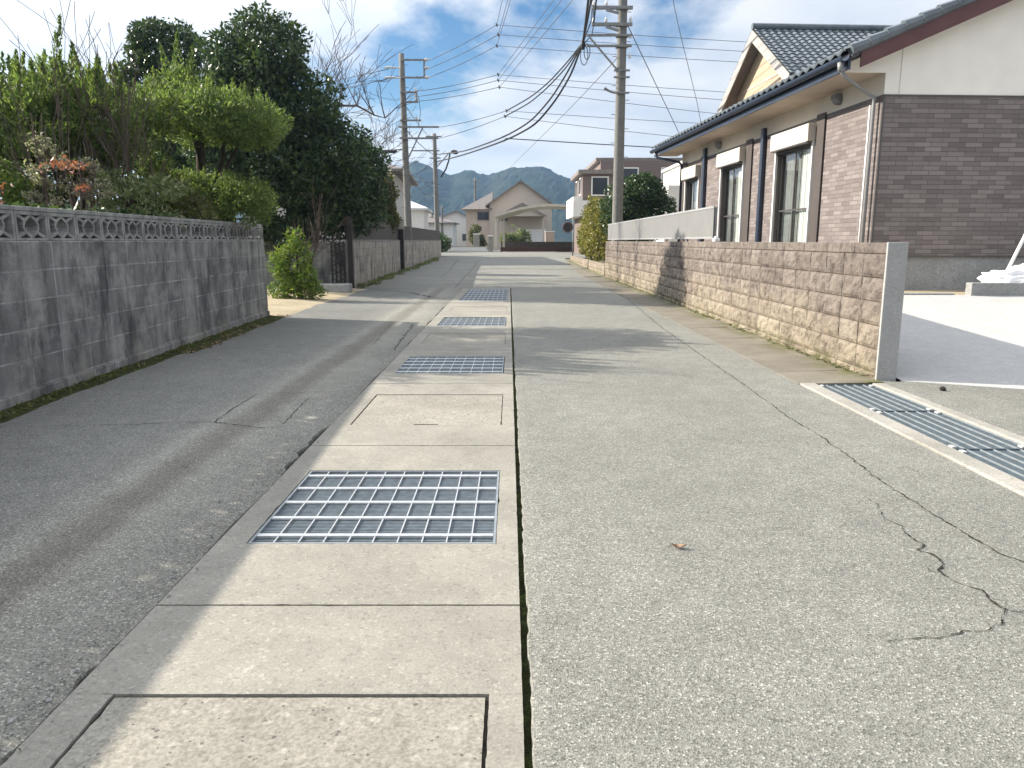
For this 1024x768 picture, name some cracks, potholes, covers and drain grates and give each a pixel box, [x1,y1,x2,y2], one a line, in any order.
drain grate [248,471,499,544]
drain grate [459,289,508,301]
crack [868,498,1024,643]
drain grate [875,411,1024,449]
drain grate [956,449,1024,481]
drain grate [396,357,504,373]
crack [610,290,1024,562]
drain grate [437,317,506,326]
drain grate [818,384,937,411]
